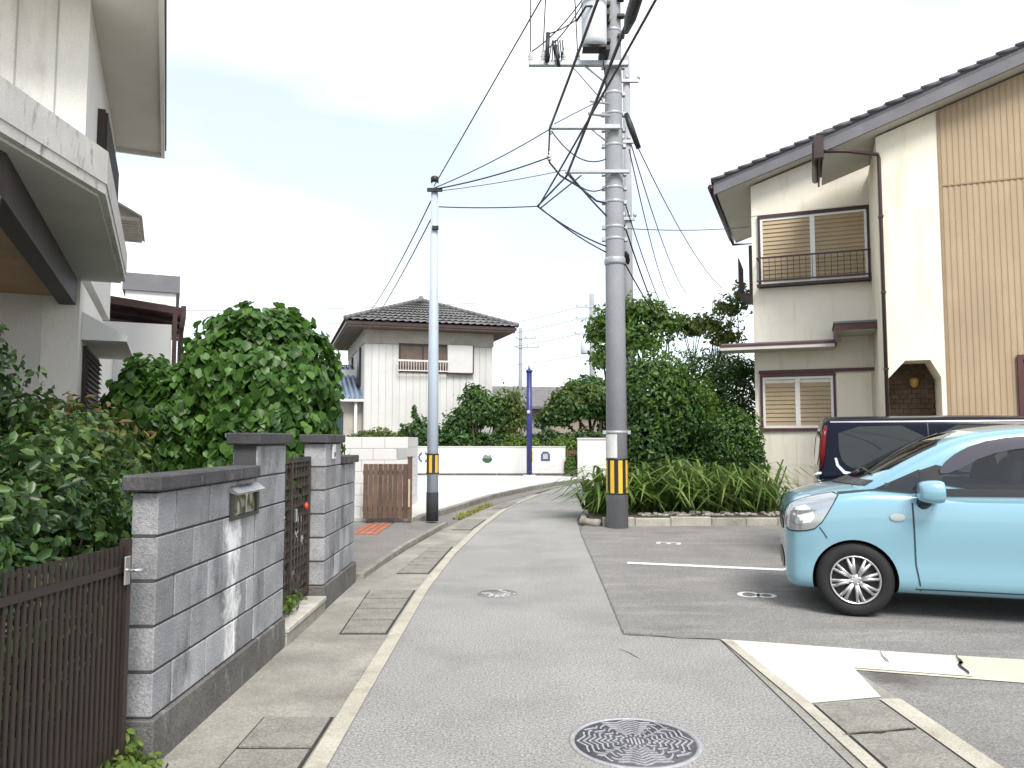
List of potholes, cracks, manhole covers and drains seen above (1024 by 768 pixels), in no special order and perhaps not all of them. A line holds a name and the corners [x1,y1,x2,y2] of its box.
crack [956,655,970,674]
manhole cover [569,717,703,768]
manhole cover [477,589,517,598]
